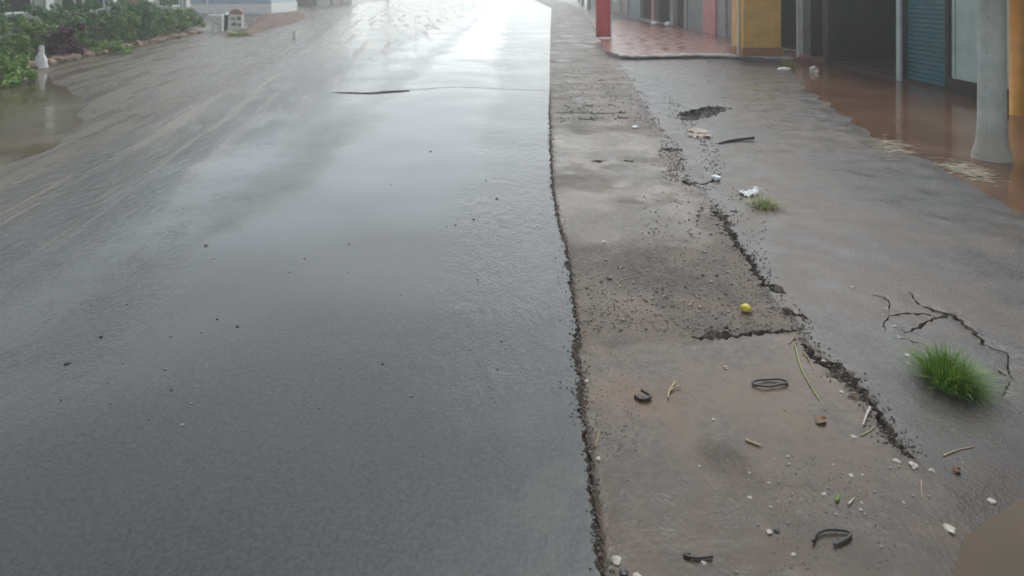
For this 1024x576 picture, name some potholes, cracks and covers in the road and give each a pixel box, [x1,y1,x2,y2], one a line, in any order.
pothole [678,105,732,121]
crack [691,209,1014,460]
